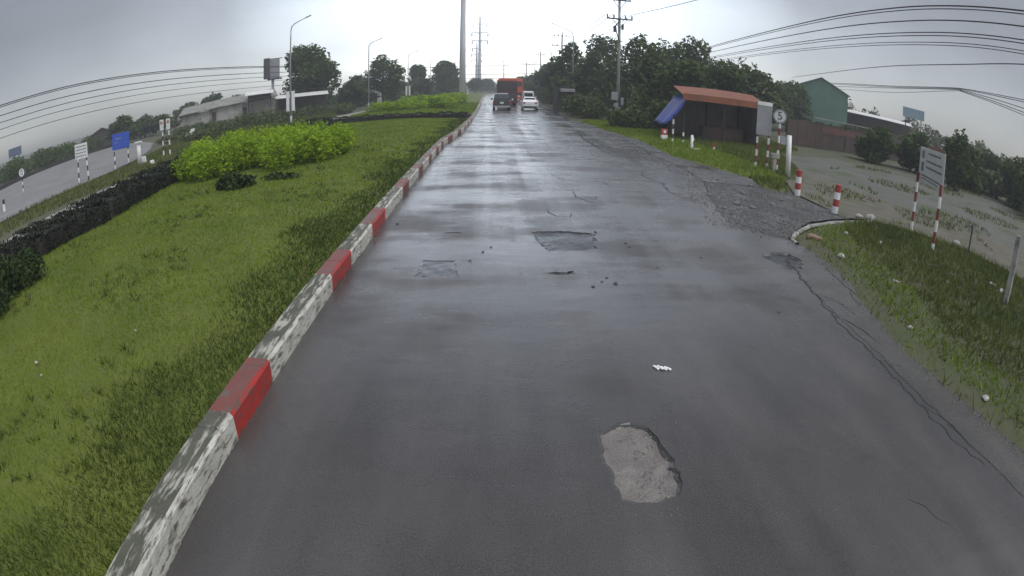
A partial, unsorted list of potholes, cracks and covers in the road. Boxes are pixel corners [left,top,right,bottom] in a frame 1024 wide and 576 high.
crack [548,170,683,217]
crack [787,258,983,463]
pothole [596,422,683,504]
pothole [762,252,803,269]
pothole [532,231,598,252]
